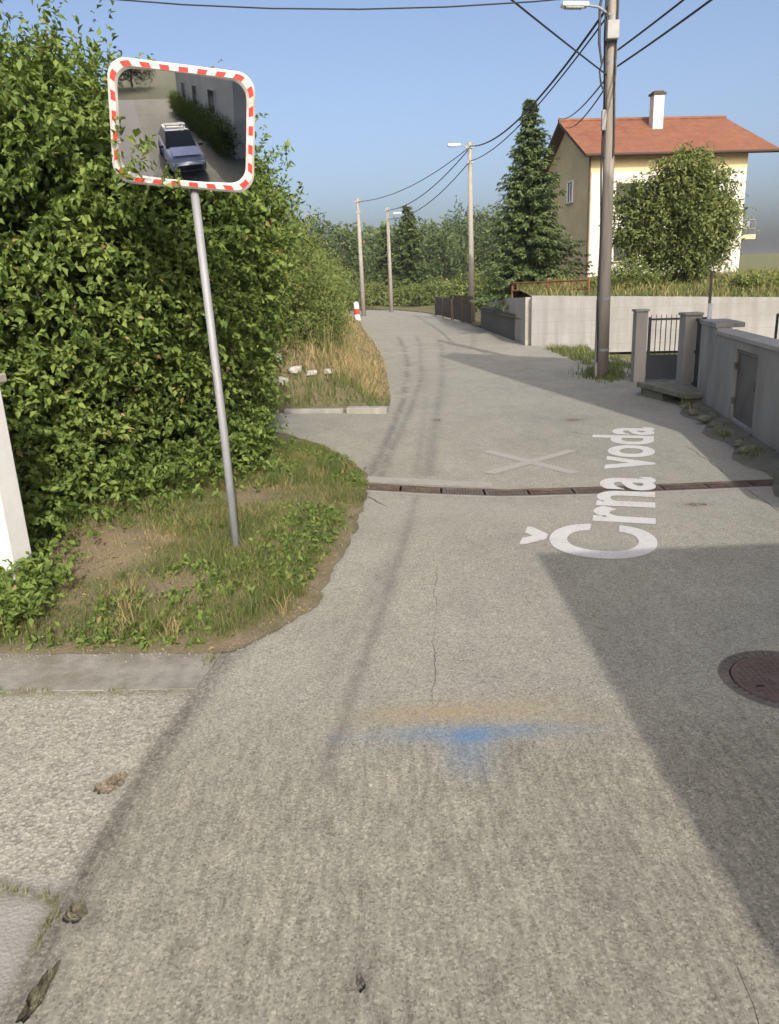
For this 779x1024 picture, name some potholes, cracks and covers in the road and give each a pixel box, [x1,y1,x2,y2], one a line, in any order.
drain grate [365,479,774,497]
manhole cover [718,650,779,709]
